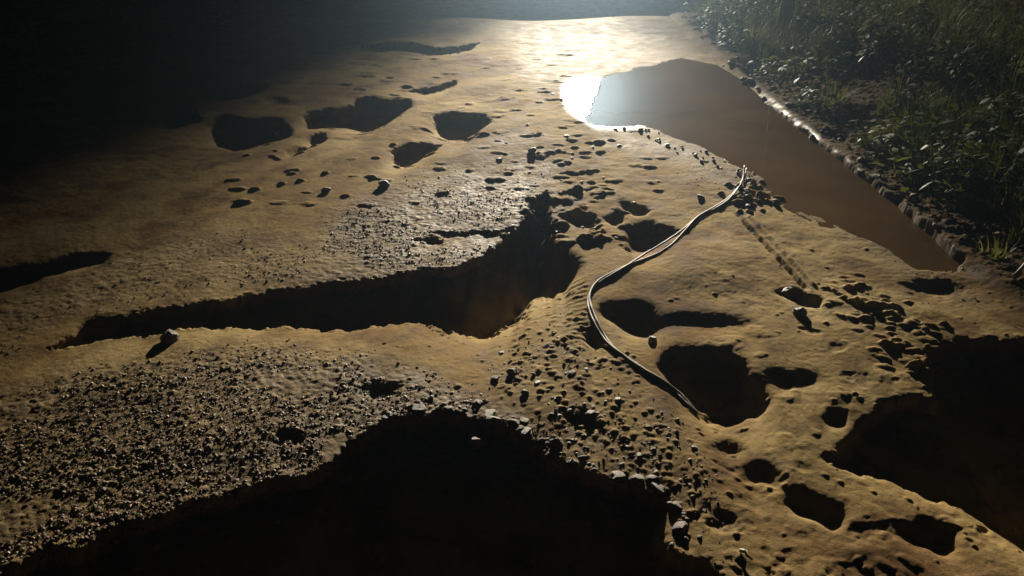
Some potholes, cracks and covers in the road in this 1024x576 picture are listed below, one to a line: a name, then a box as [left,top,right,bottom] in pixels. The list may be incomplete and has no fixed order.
pothole [391,142,443,175]
pothole [433,111,492,152]
pothole [138,115,292,172]
pothole [620,201,649,227]
pothole [4,408,722,576]
pothole [823,336,1024,576]
